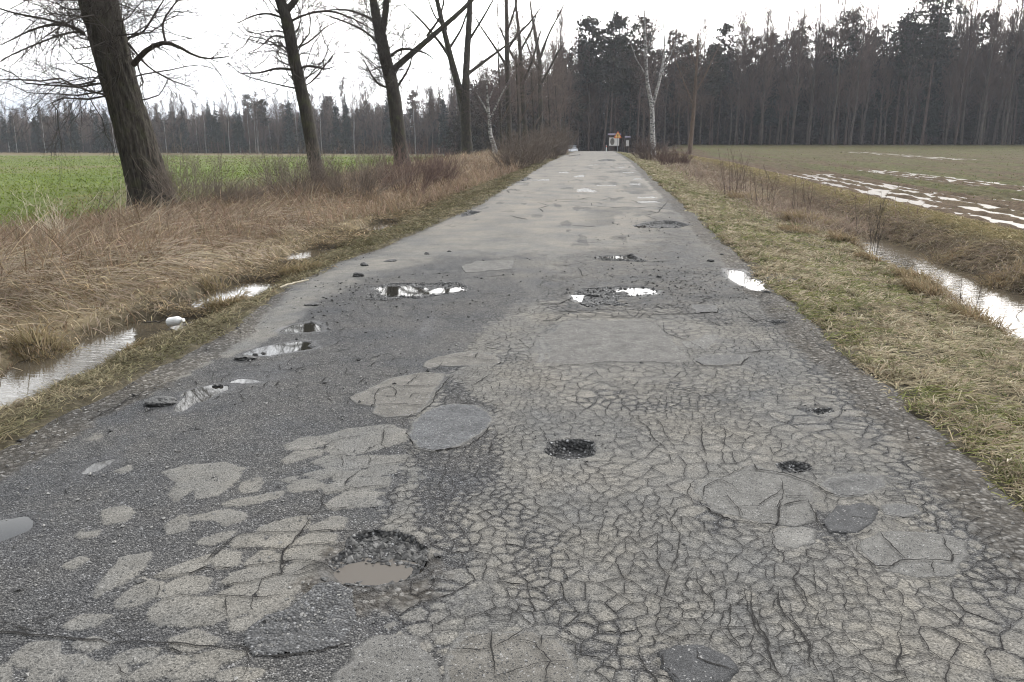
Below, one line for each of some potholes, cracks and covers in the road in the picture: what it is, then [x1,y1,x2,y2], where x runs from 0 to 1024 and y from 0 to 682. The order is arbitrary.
pothole [566,286,659,307]
pothole [532,433,612,462]
pothole [633,220,691,228]
pothole [325,524,445,590]
crack [0,165,1024,682]
pothole [594,254,648,262]
pothole [366,282,472,301]
pothole [806,404,846,419]
pothole [775,461,813,473]
